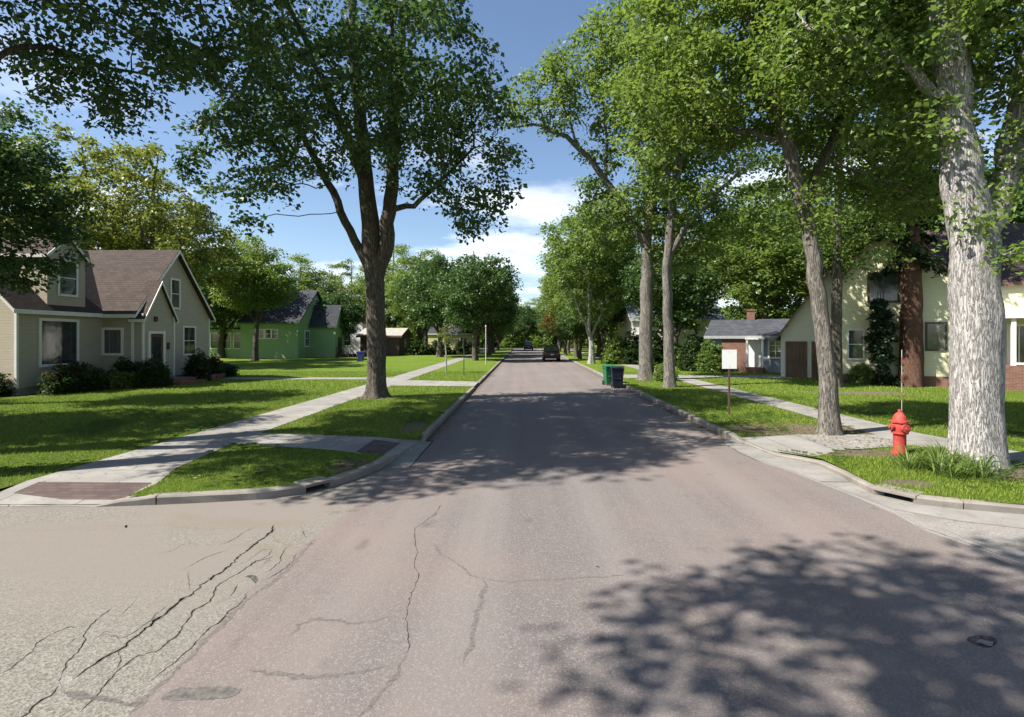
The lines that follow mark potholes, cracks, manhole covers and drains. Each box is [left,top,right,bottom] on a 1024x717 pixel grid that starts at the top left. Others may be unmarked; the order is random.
crack [405,506,440,654]
drain grate [873,484,924,505]
crack [0,525,305,717]
drain grate [294,476,331,494]
pothole [966,635,997,648]
